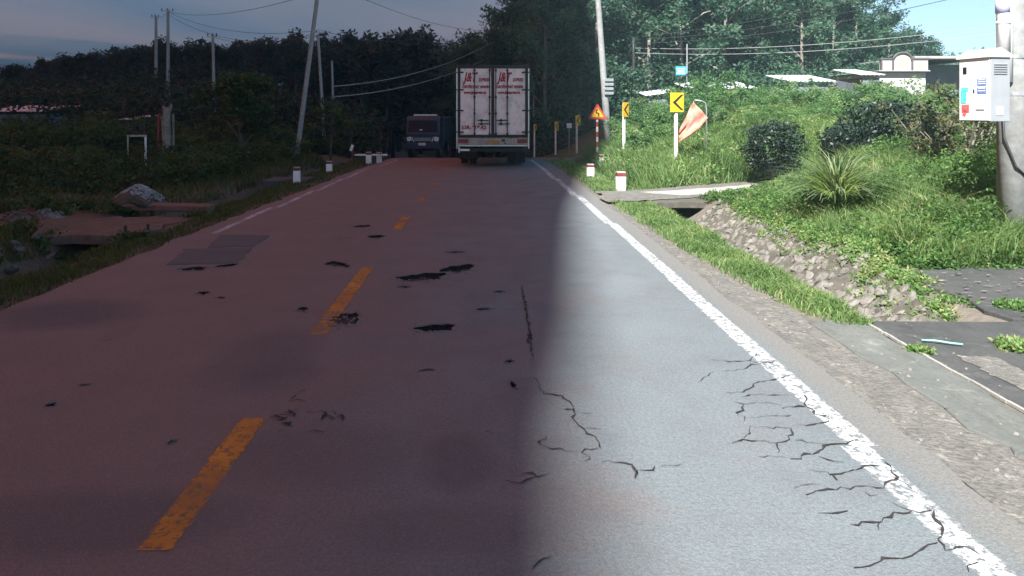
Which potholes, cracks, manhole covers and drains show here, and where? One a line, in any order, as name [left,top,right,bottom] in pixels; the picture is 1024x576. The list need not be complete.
crack [700,353,979,571]
pothole [321,260,353,268]
crack [533,377,682,478]
pothole [407,323,460,334]
pothole [388,271,454,283]
pothole [435,263,479,276]
crack [258,390,345,464]
pothole [326,310,363,329]
crack [506,472,548,483]
